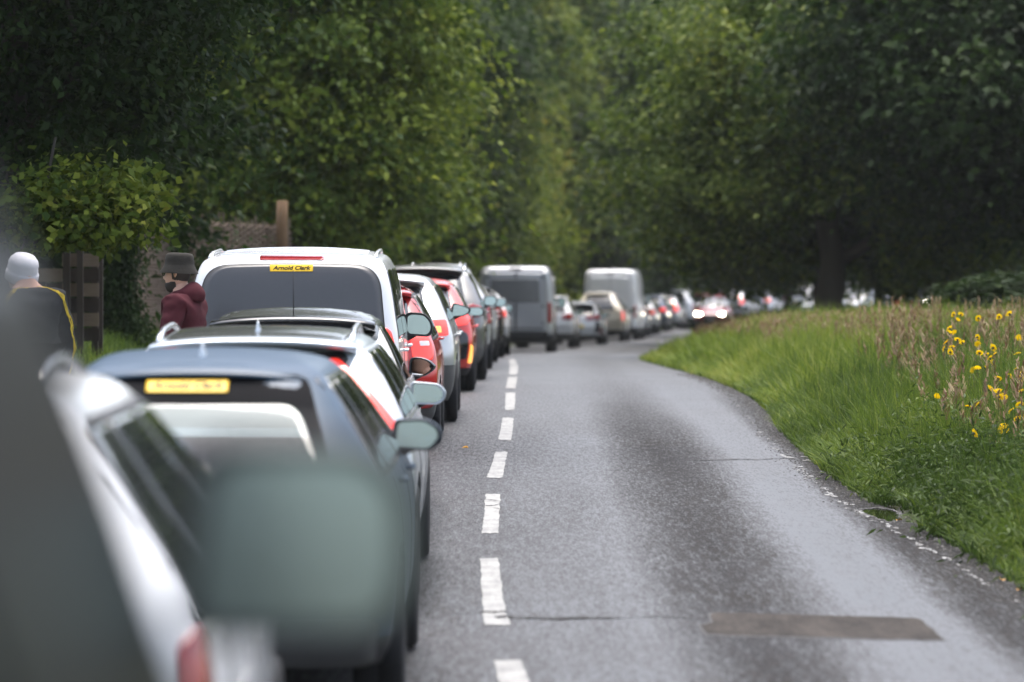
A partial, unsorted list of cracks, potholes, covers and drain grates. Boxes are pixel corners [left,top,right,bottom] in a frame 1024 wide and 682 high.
pothole [857,507,903,522]
